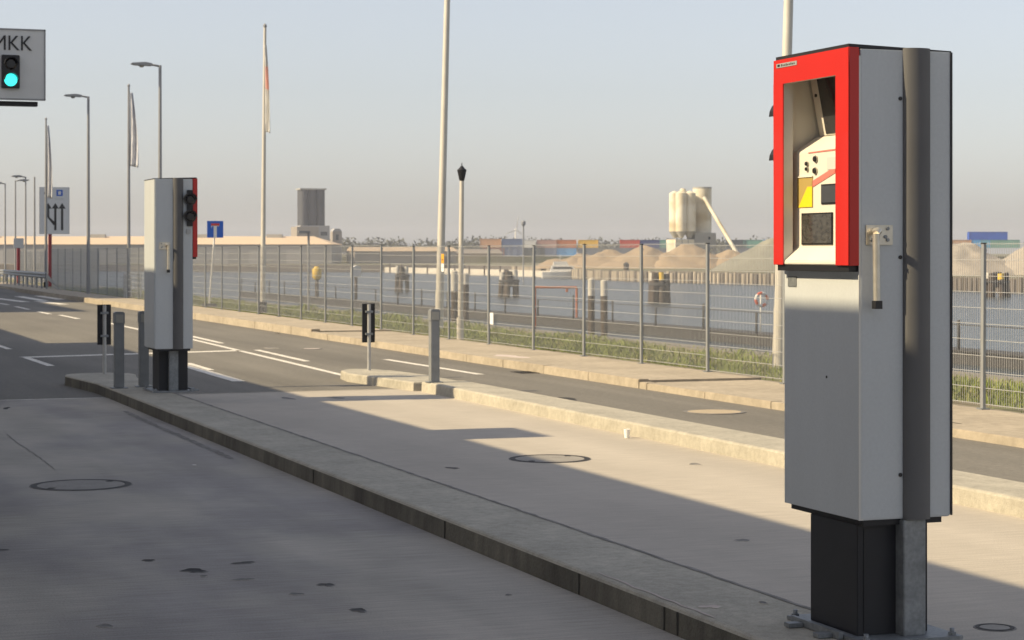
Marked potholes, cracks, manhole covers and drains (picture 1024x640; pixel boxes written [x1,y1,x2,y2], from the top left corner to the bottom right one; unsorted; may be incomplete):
manhole cover [973,623,1017,632]
manhole cover [29,479,132,491]
manhole cover [509,454,591,463]
